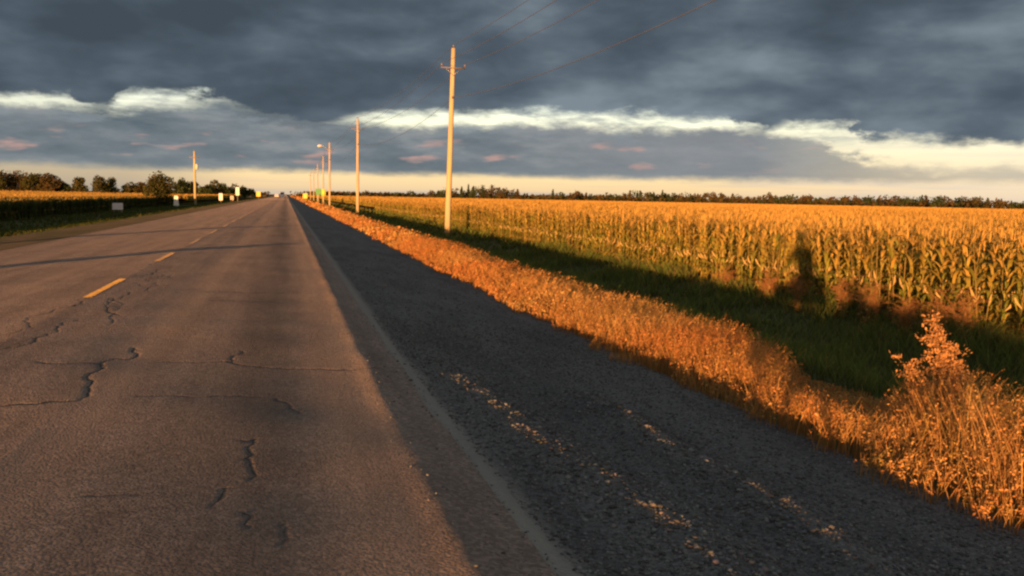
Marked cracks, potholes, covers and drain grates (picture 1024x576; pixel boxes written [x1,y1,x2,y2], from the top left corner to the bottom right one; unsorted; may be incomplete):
crack [0,348,138,407]
crack [174,351,391,372]
crack [106,267,171,325]
crack [239,439,257,480]
